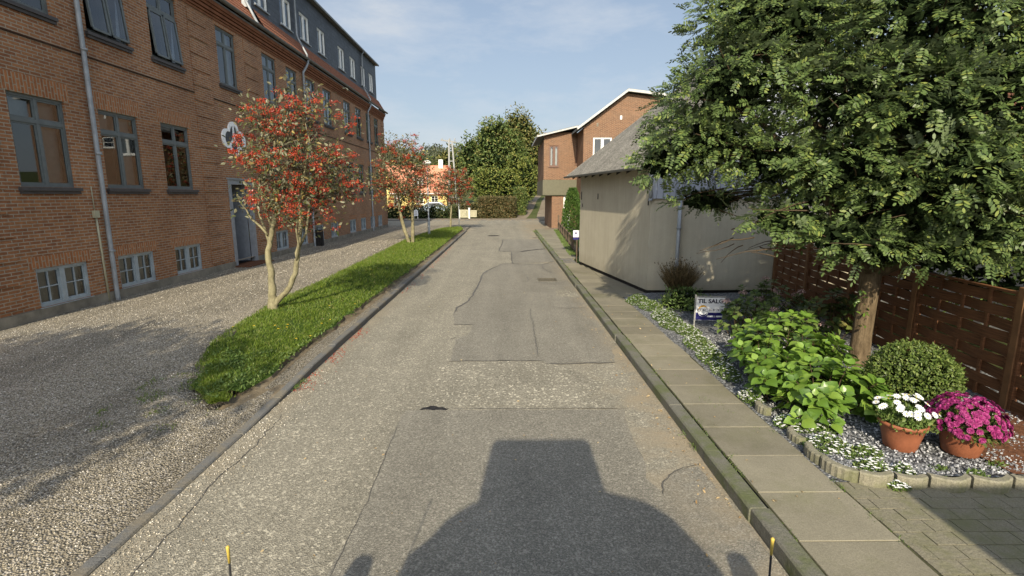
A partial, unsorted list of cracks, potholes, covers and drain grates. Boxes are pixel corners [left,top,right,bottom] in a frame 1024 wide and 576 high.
crack [661,465,695,495]
crack [330,430,396,576]
crack [130,413,282,576]
